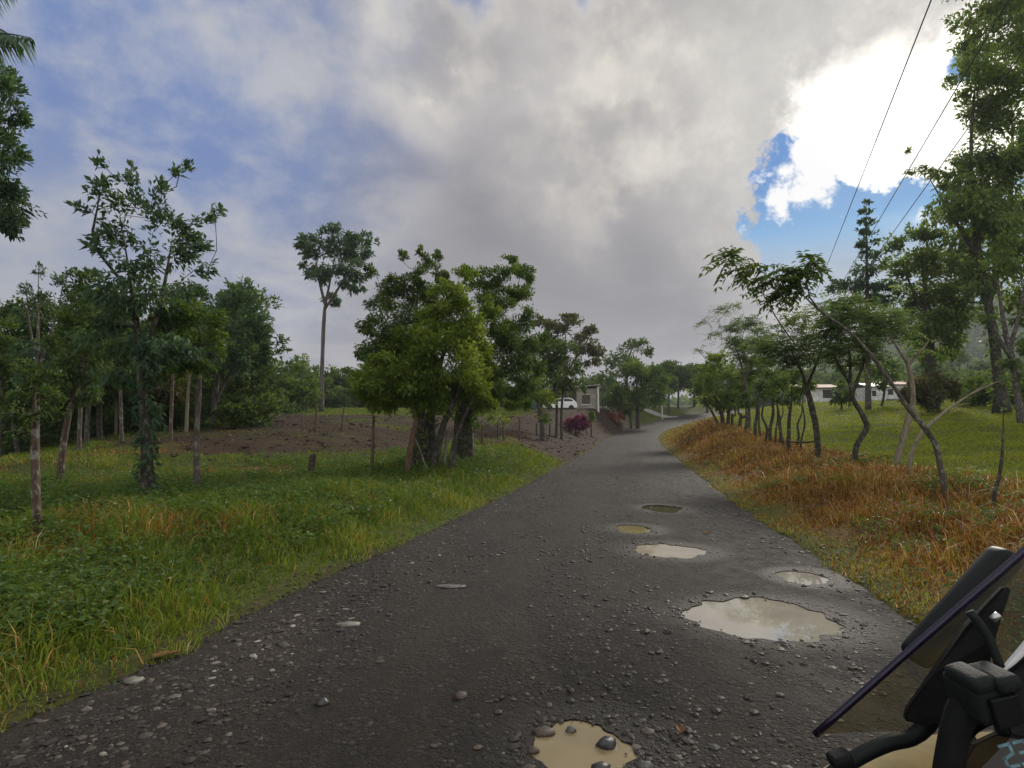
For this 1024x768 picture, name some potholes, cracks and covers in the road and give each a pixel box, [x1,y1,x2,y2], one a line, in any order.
pothole [617,525,651,533]
pothole [533,721,638,768]
pothole [633,544,707,558]
pothole [679,597,846,642]
pothole [774,571,830,585]
